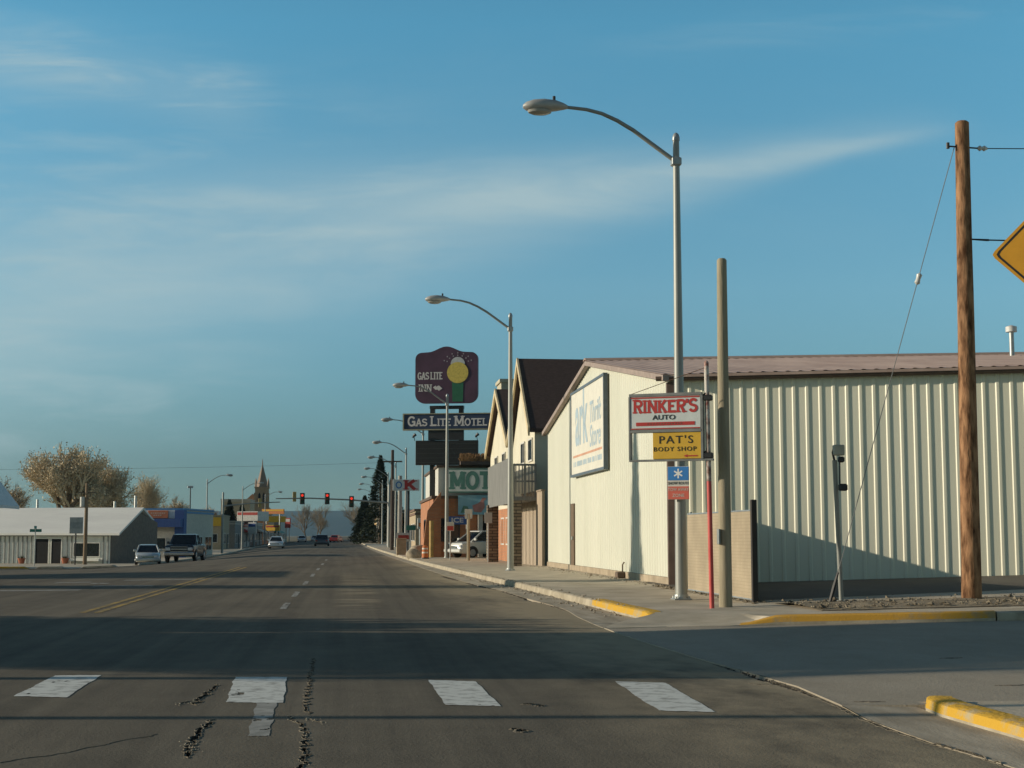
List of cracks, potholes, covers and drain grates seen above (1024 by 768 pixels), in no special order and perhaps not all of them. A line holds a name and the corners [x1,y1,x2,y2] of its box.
crack [0,734,156,763]
crack [287,658,326,768]
crack [175,684,220,759]
